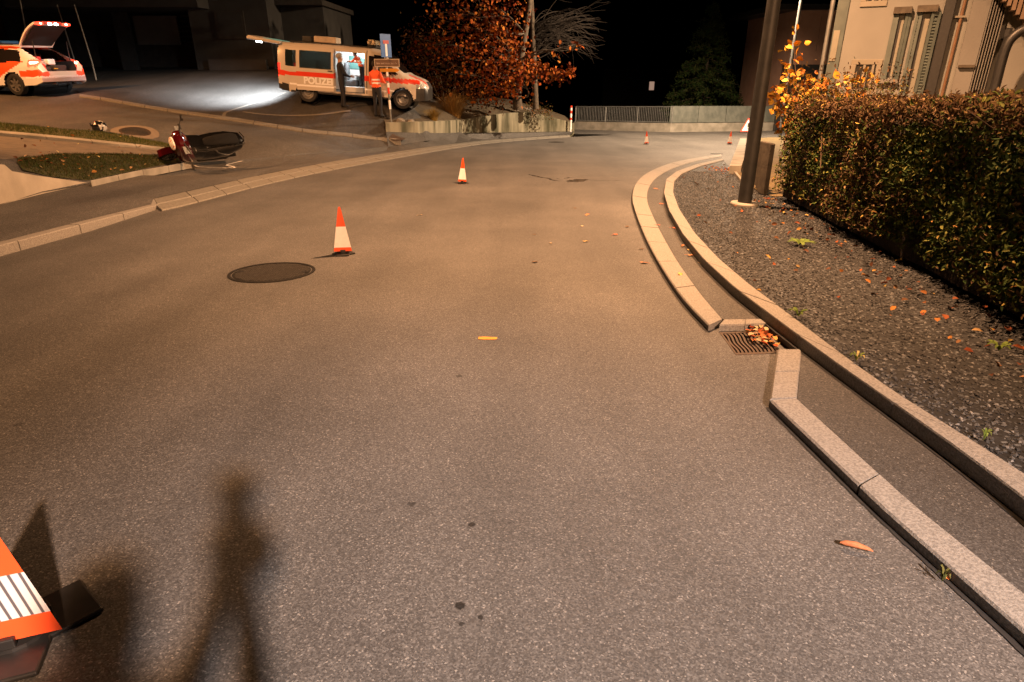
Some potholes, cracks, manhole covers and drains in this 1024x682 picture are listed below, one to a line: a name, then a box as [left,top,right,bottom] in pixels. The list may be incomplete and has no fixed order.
manhole cover [227,262,315,283]
manhole cover [110,125,159,139]
drain grate [719,330,779,355]
